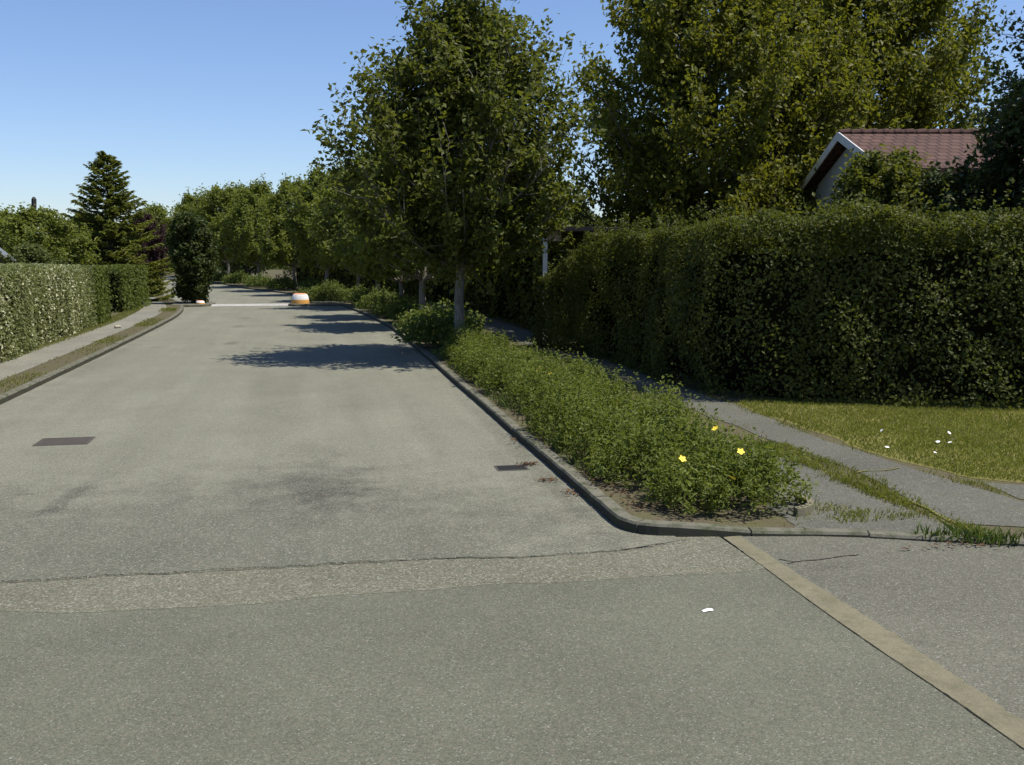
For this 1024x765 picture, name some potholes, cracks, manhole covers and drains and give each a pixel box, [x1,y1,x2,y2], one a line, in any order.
manhole cover [32,437,95,446]
